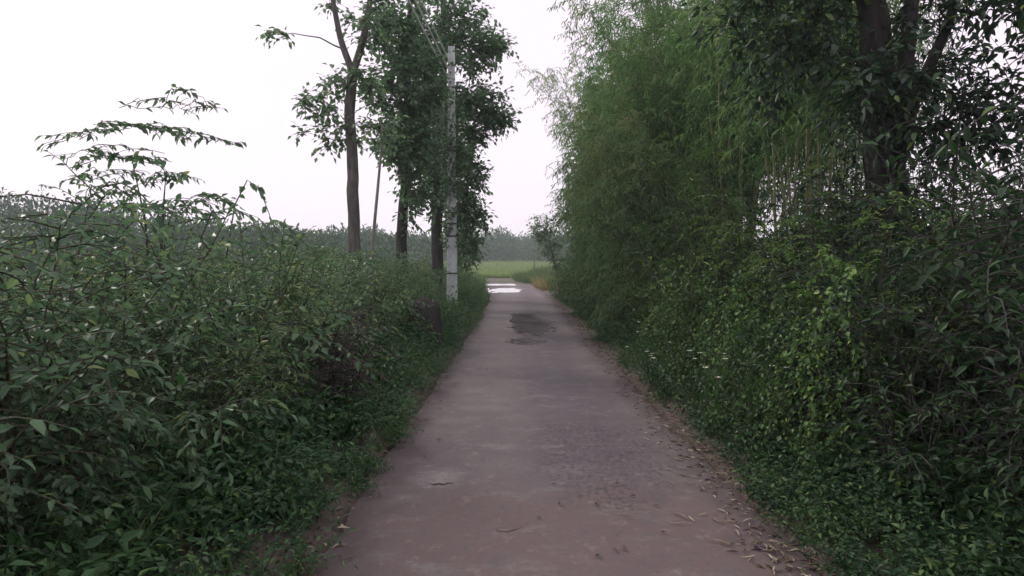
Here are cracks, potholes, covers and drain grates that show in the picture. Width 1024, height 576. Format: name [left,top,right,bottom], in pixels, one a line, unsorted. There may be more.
pothole [507,312,558,337]
